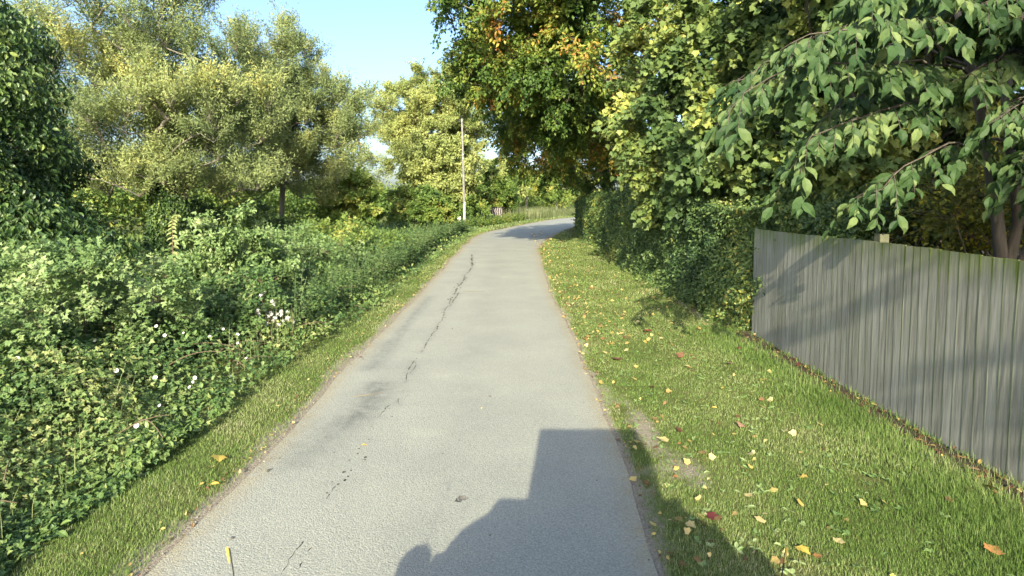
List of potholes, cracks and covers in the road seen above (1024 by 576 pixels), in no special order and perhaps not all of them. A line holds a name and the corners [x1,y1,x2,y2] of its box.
crack [380,254,474,417]
